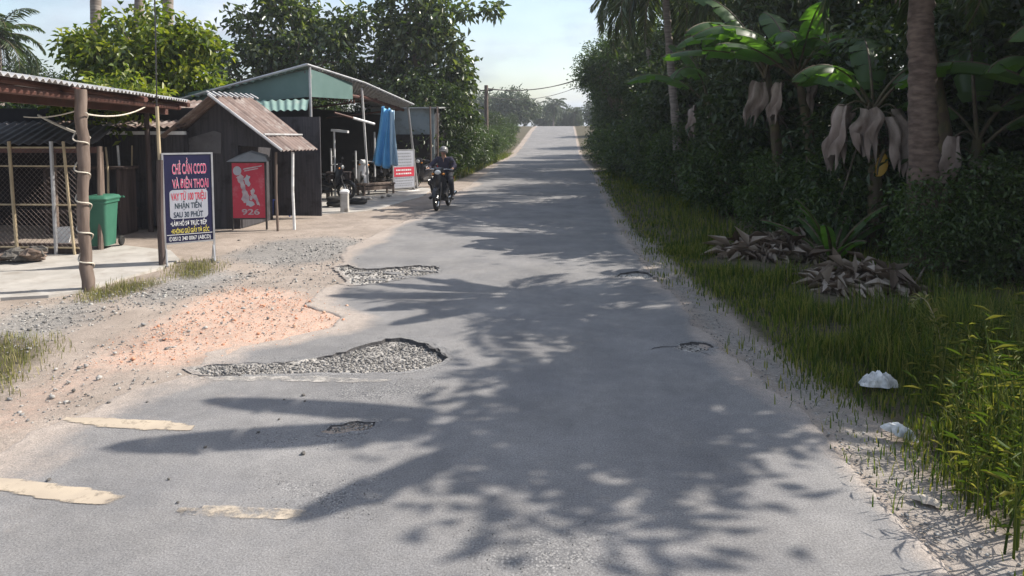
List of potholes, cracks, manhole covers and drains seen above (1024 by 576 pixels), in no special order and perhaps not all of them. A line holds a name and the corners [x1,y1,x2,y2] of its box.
pothole [332,264,443,286]
pothole [608,270,656,280]
pothole [183,336,454,379]
pothole [670,340,720,354]
pothole [314,418,382,437]
